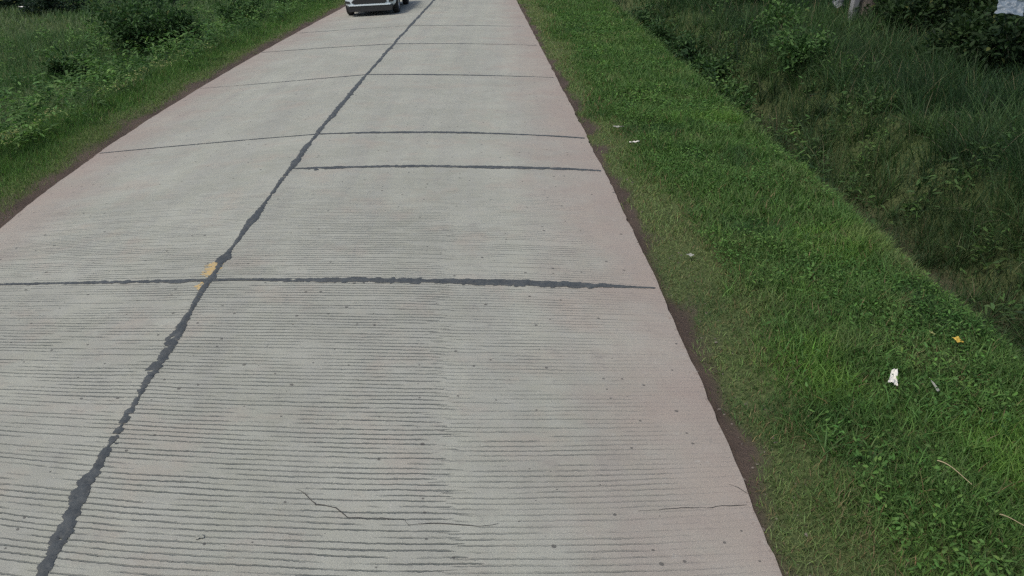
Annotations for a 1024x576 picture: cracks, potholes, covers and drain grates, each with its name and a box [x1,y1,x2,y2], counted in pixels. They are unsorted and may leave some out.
crack [297,489,499,526]
crack [641,484,748,511]
